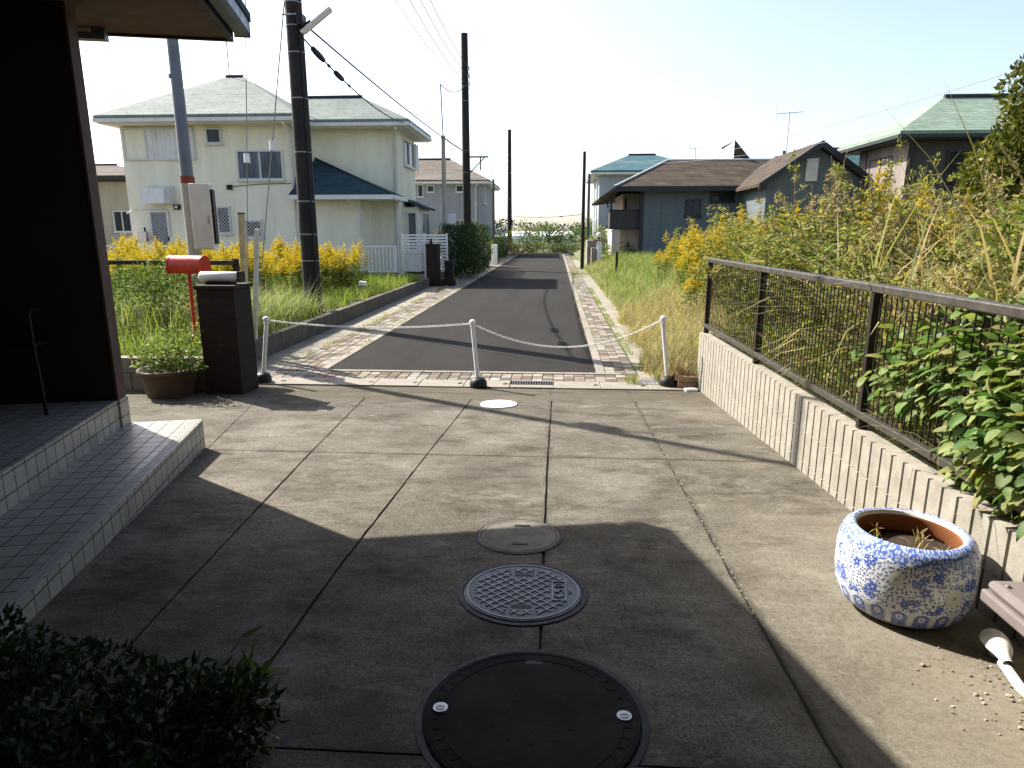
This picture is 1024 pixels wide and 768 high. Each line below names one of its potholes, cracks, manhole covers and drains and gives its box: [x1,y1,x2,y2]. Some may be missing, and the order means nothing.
manhole cover [480,400,517,409]
manhole cover [476,519,562,555]
manhole cover [415,649,650,768]
manhole cover [458,563,588,629]
drain grate [510,380,554,389]
